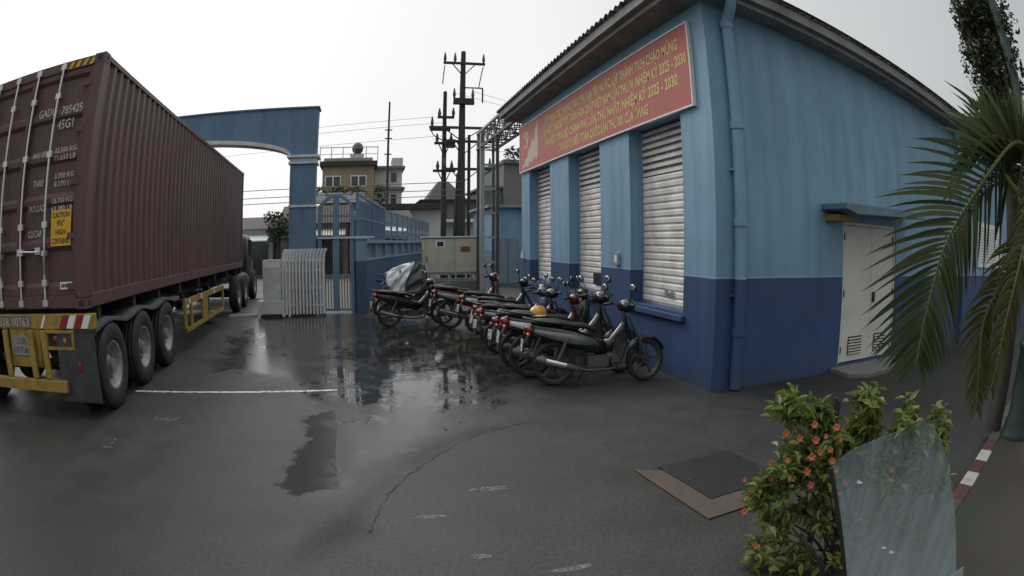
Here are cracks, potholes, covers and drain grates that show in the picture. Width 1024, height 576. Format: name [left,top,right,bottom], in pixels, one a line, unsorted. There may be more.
crack [368,419,550,533]
manhole cover [635,450,802,519]
